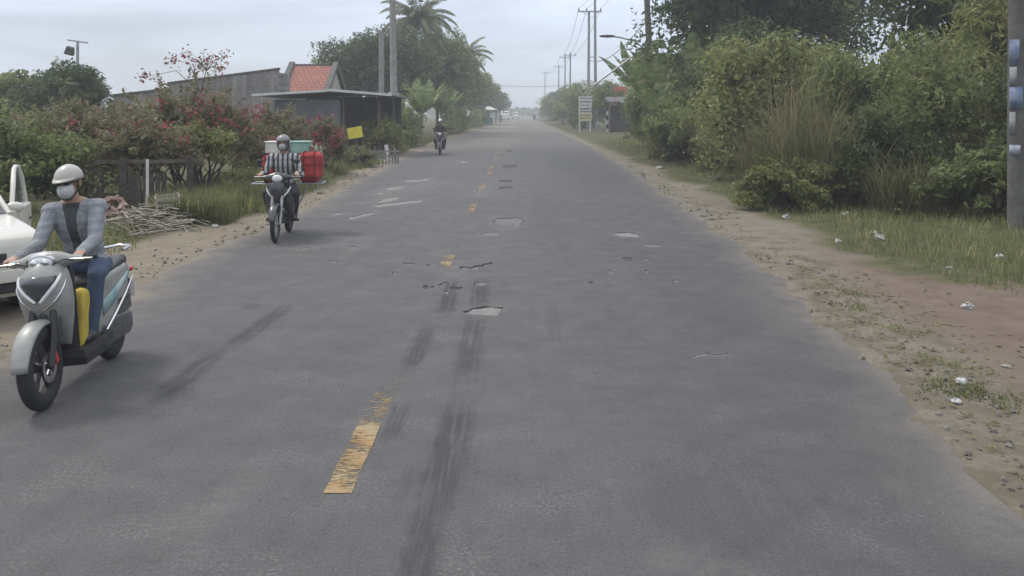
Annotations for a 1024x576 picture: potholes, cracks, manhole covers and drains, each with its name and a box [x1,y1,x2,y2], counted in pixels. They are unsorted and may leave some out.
pothole [493,217,524,227]
pothole [462,306,503,316]
